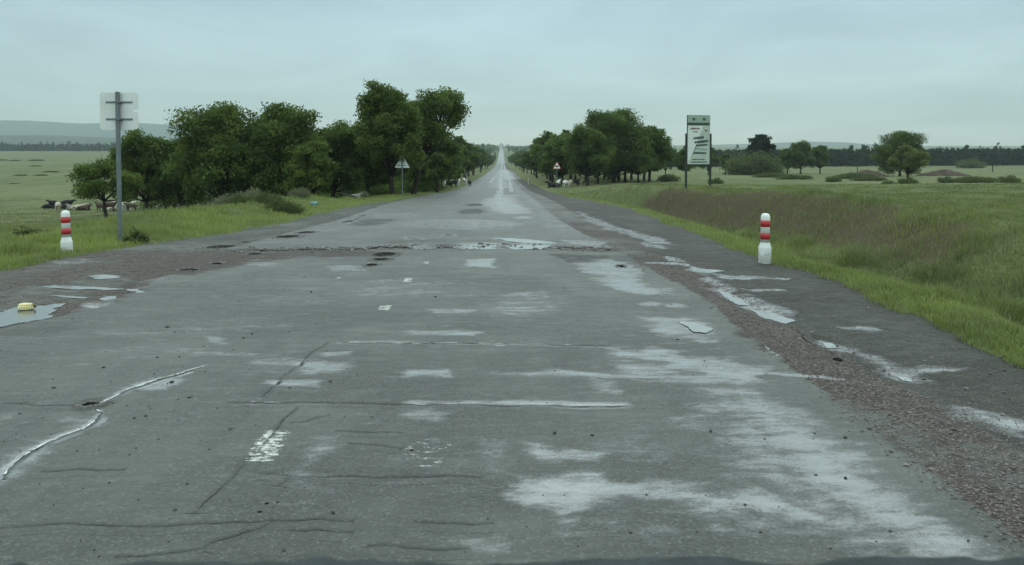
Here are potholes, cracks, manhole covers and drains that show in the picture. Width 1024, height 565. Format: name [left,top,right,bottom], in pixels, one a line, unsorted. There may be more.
pothole [71,398,110,411]
crack [0,512,496,565]
crack [0,364,631,489]
